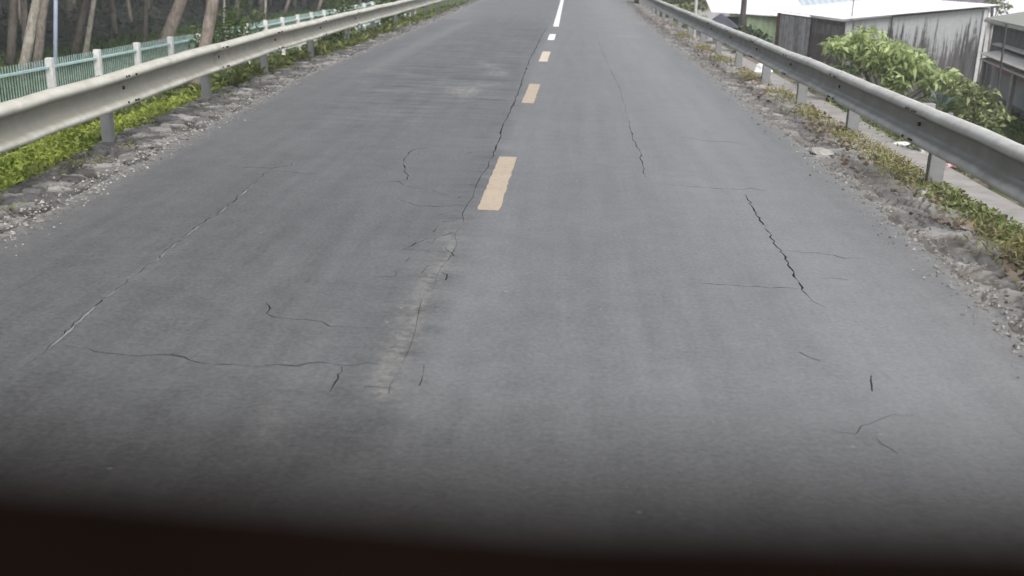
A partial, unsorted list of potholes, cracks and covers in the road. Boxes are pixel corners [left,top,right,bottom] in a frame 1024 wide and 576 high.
crack [687,186,859,305]
crack [8,163,377,391]
crack [831,414,901,453]
